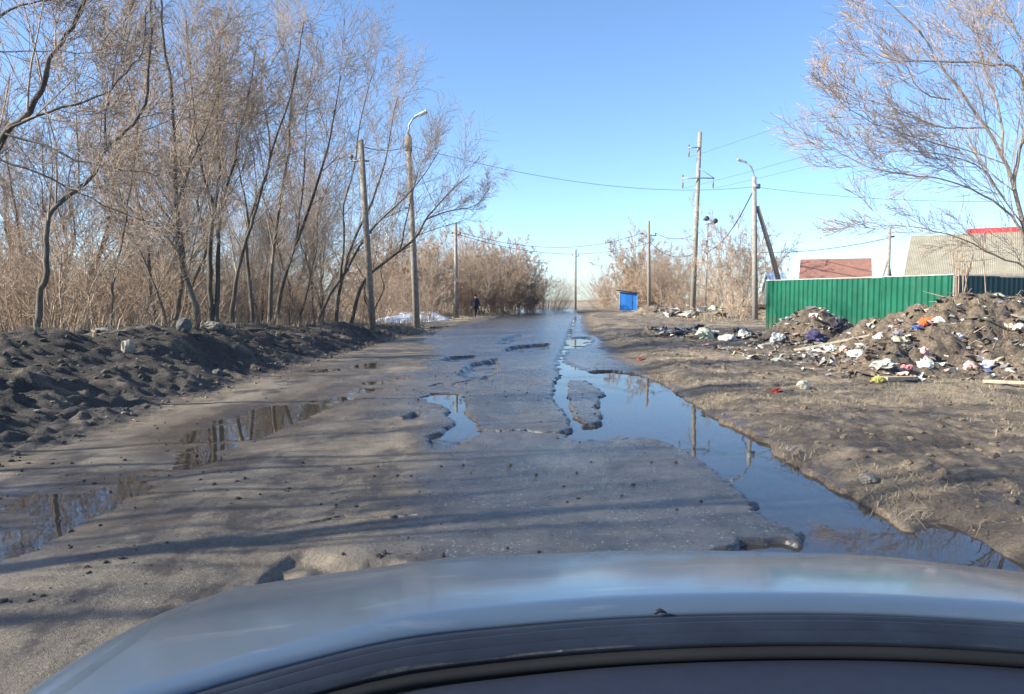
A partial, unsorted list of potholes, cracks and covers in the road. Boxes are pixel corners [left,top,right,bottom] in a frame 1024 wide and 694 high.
pothole [454,356,502,381]
pothole [417,391,490,450]
pothole [500,343,551,353]
pothole [398,411,427,420]
pothole [250,548,411,585]
